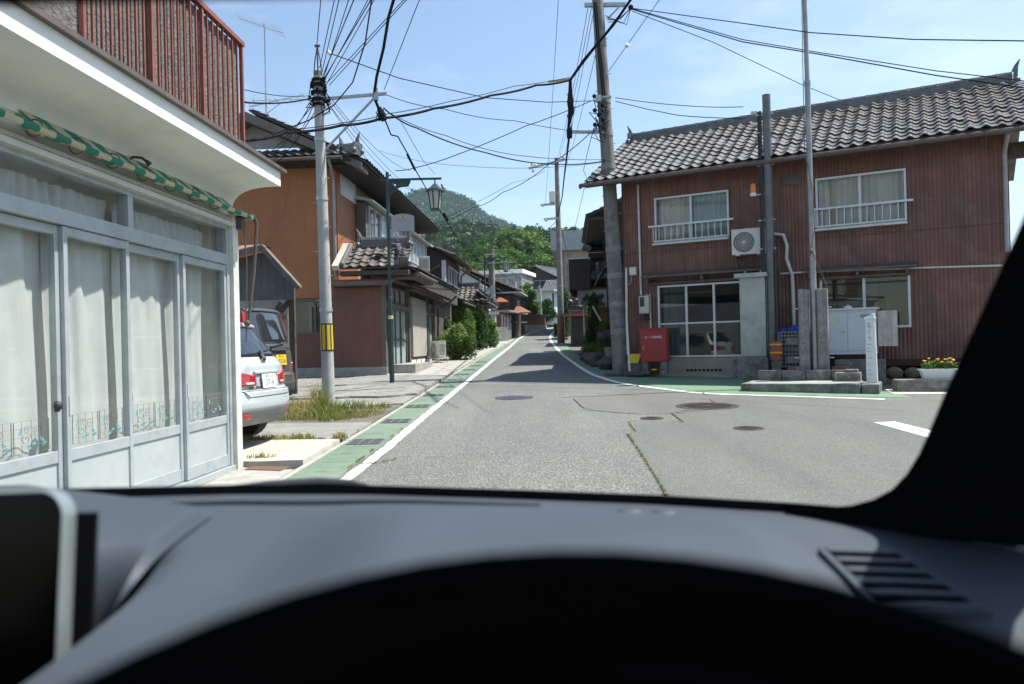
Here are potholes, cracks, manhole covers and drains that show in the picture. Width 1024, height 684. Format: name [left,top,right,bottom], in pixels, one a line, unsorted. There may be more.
manhole cover [676,402,740,410]
